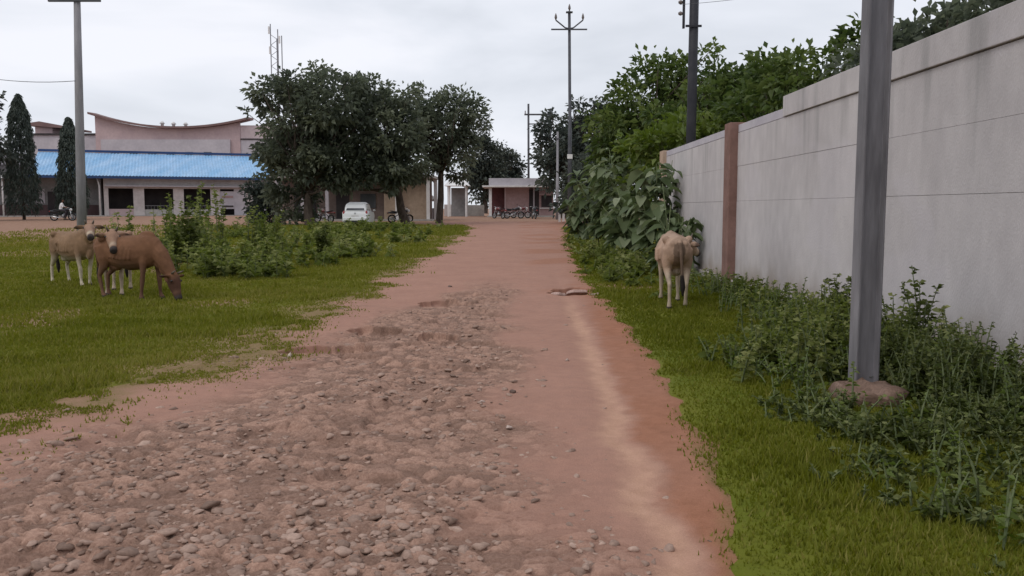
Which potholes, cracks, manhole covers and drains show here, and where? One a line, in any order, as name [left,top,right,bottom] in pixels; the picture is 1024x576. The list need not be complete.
pothole [270,342,388,359]
pothole [414,298,463,309]
pothole [342,325,410,342]
